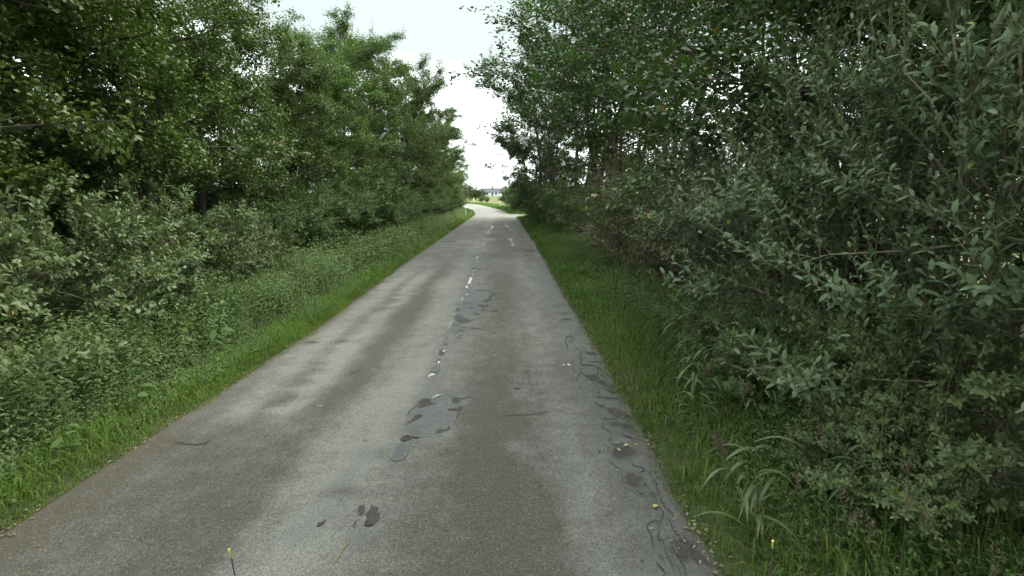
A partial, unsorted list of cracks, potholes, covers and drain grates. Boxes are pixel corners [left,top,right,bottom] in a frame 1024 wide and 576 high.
pothole [364,503,380,525]
crack [557,312,700,574]
